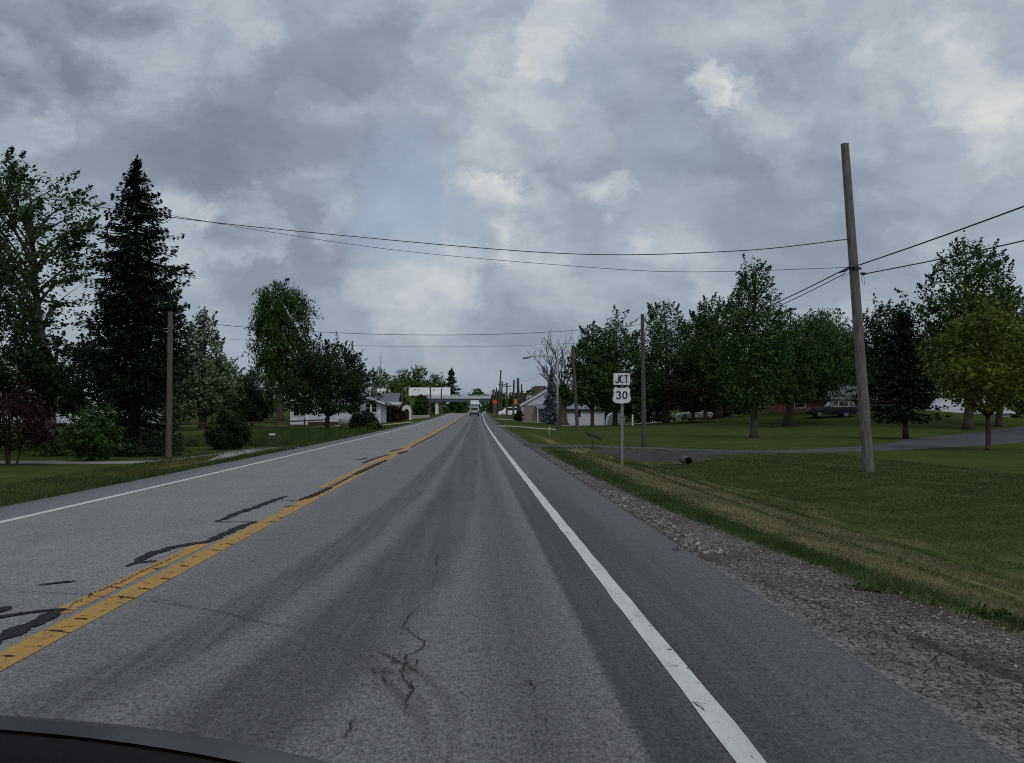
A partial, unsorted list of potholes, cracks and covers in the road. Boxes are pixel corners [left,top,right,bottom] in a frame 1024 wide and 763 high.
crack [353,605,426,716]
